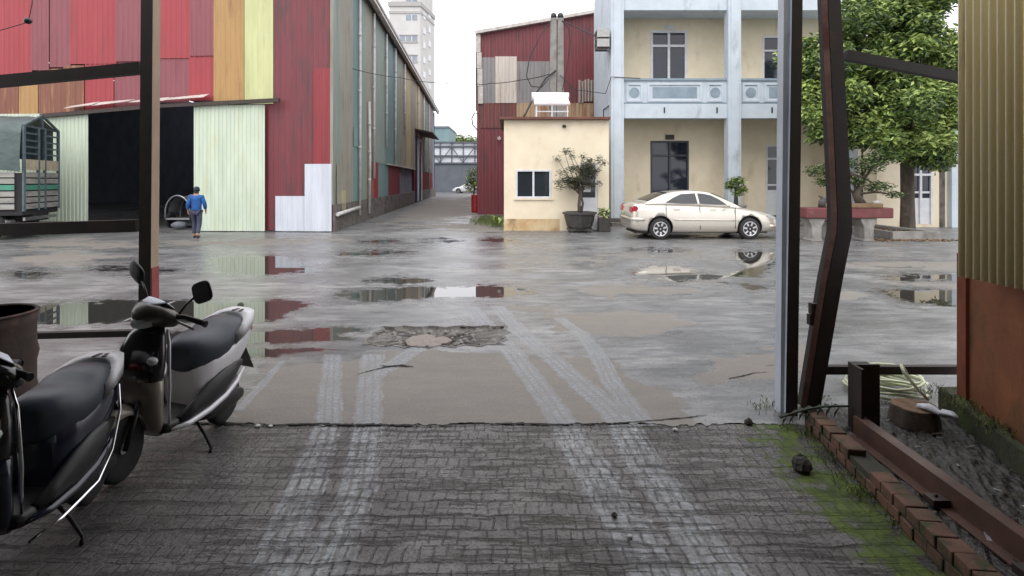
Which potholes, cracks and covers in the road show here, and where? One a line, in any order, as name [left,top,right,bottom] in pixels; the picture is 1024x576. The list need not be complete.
pothole [361,325,511,348]
crack [358,364,413,374]
